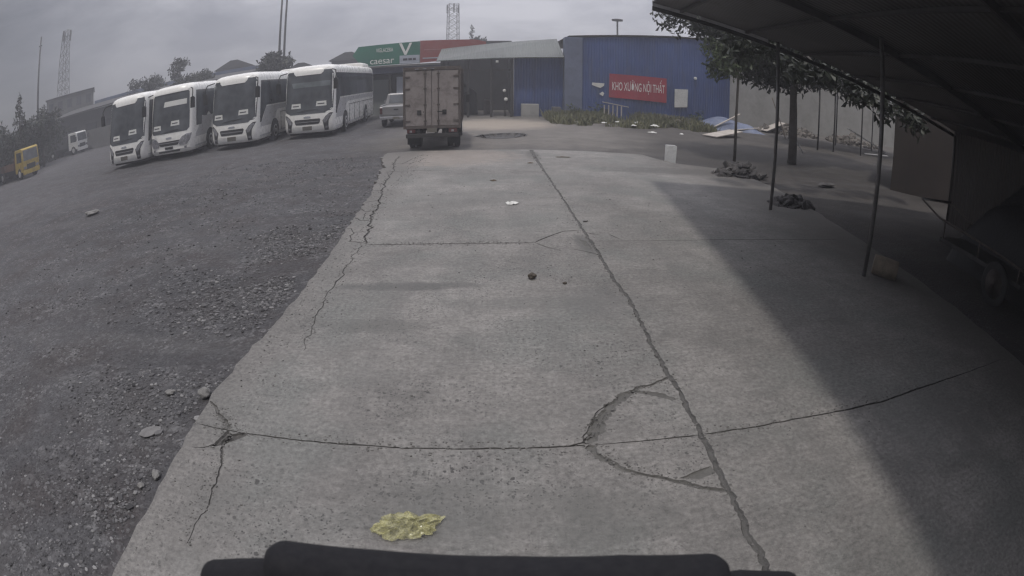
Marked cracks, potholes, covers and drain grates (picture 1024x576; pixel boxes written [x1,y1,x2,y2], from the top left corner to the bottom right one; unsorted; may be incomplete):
crack [534,230,595,254]
crack [303,156,429,351]
crack [187,401,247,543]
